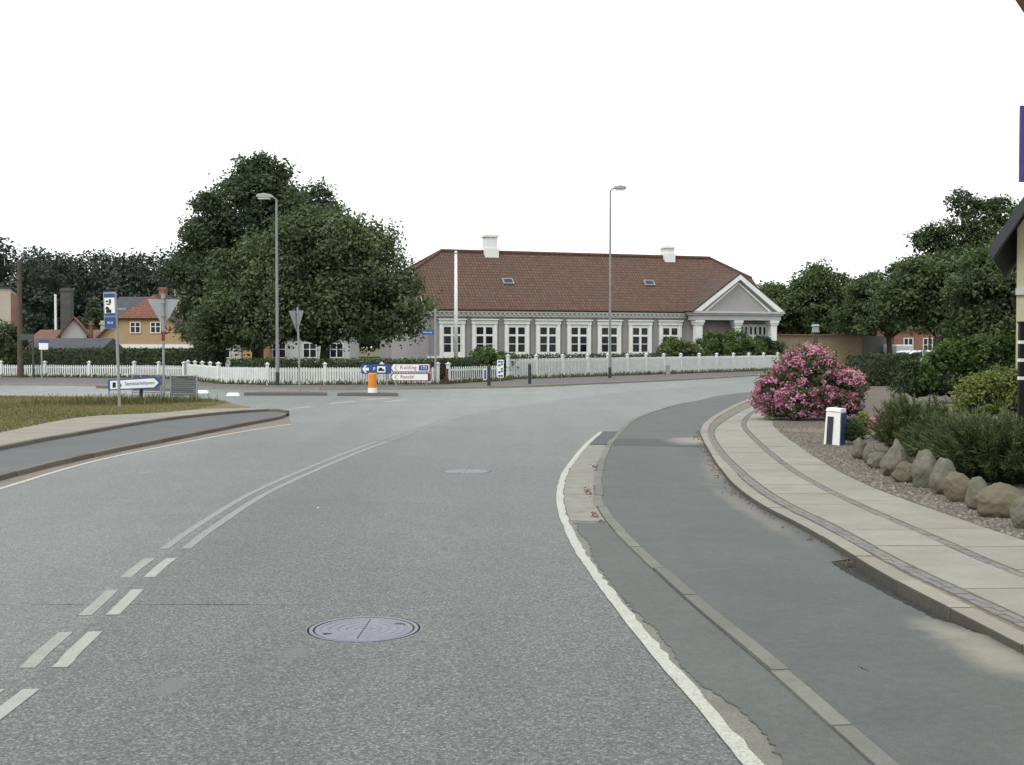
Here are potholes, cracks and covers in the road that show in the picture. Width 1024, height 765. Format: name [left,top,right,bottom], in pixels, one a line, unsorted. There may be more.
manhole cover [307,616,420,643]
